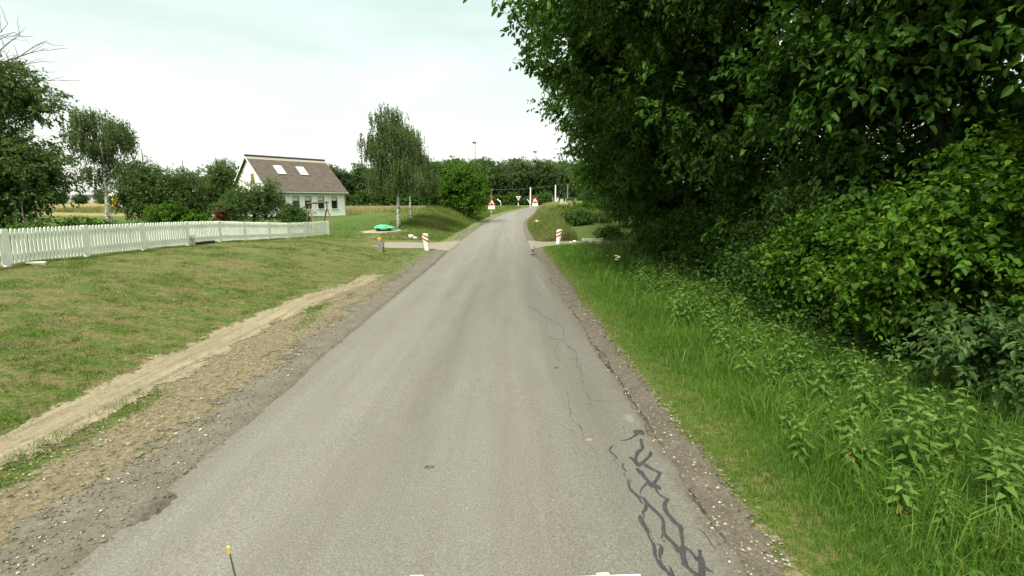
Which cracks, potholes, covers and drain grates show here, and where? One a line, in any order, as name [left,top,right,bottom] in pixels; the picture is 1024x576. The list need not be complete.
crack [528,305,731,550]
